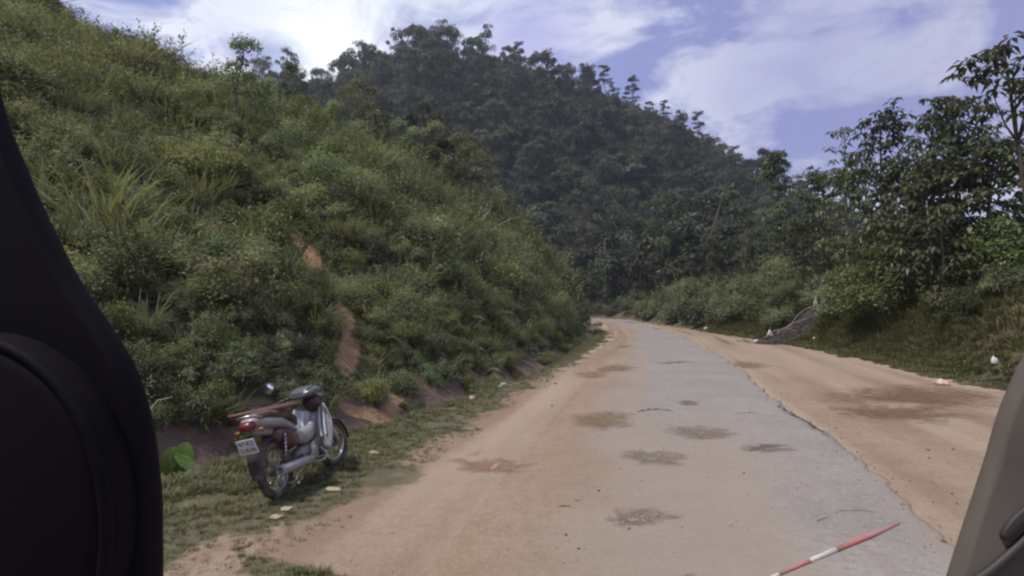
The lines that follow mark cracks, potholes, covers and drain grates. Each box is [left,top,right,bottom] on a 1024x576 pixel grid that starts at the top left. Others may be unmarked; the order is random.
pothole [577,410,624,427]
pothole [672,423,729,439]
pothole [631,448,676,463]
pothole [608,508,682,525]
